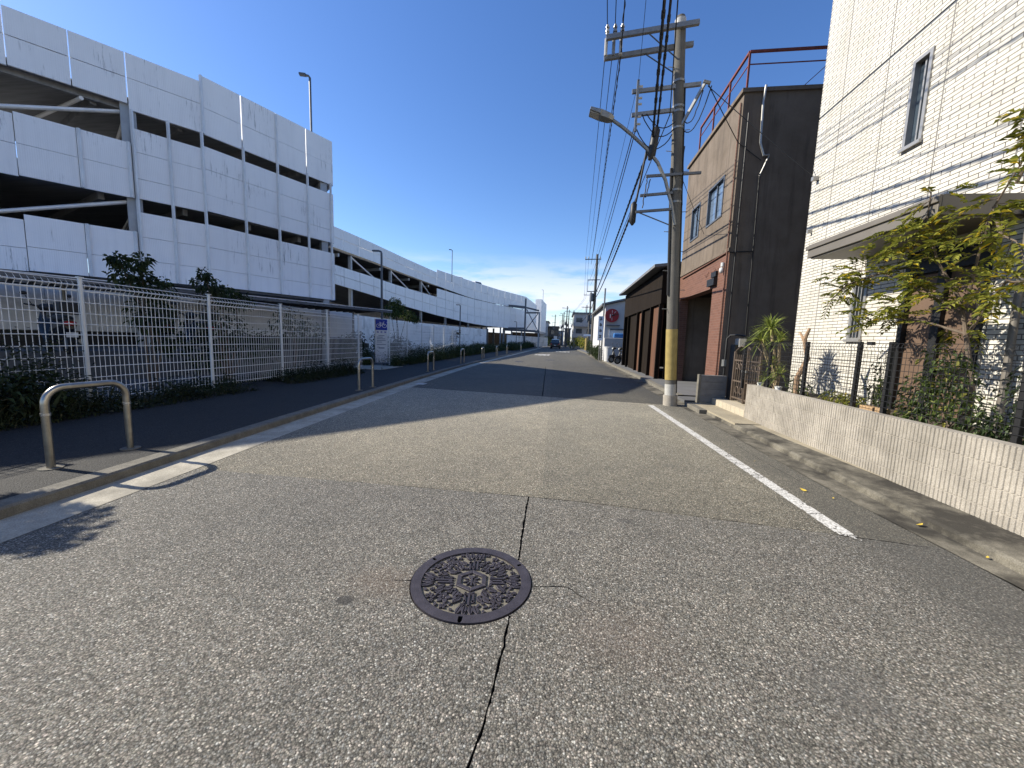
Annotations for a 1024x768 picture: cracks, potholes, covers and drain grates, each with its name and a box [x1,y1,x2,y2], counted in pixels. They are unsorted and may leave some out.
manhole cover [410,548,531,625]
crack [531,586,593,603]
